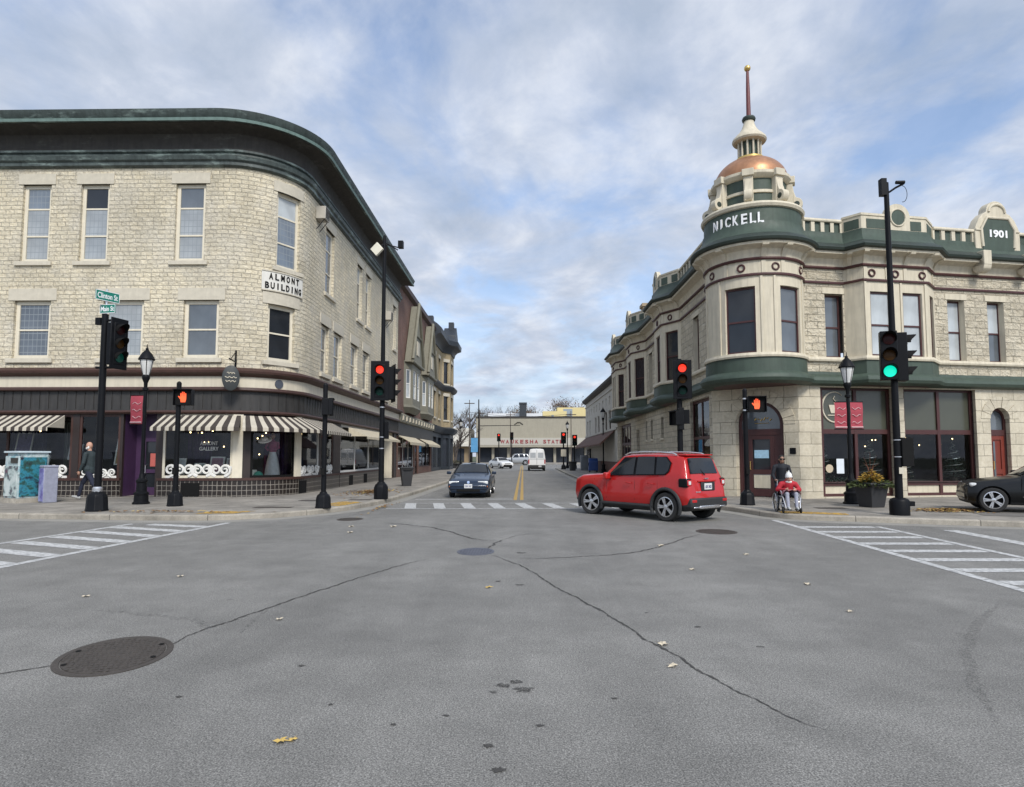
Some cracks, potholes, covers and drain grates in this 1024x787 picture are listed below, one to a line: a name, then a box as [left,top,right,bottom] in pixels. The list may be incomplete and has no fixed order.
manhole cover [457,548,494,556]
manhole cover [50,636,174,677]
crack [380,522,825,730]
crack [173,561,416,644]
